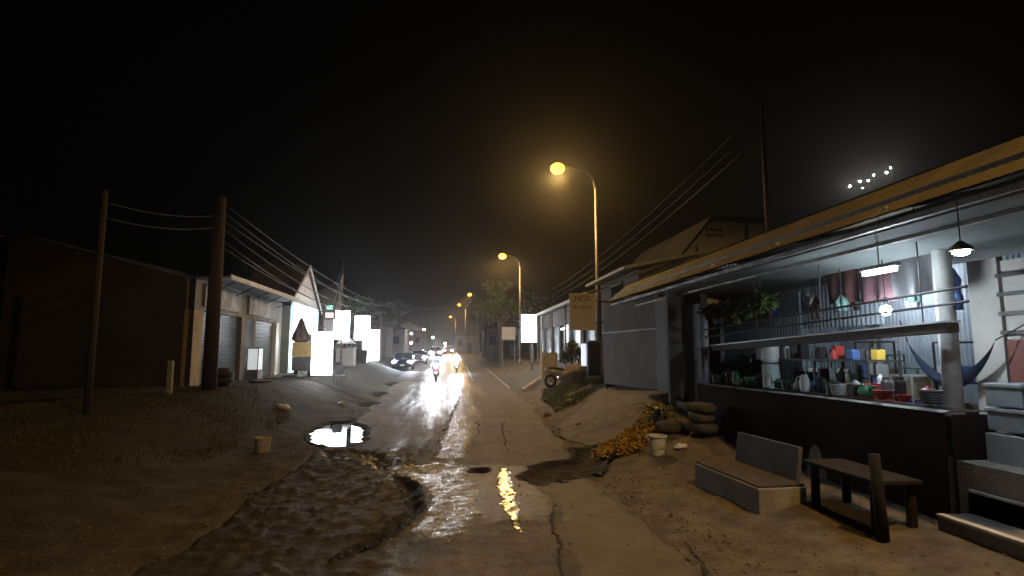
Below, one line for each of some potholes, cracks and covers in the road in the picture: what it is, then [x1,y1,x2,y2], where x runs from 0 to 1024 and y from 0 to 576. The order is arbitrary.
crack [549,508,565,576]
pothole [391,462,488,541]
crack [683,541,708,576]
pothole [304,420,371,448]
